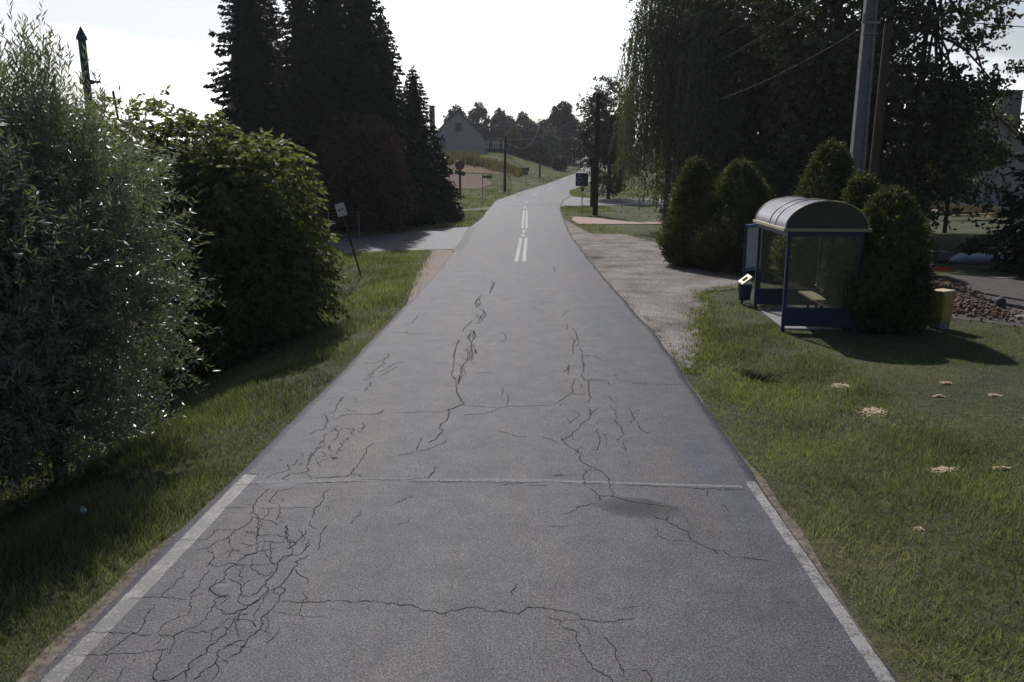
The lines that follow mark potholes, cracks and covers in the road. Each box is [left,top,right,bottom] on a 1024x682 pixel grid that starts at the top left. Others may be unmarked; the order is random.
crack [81,282,766,682]
